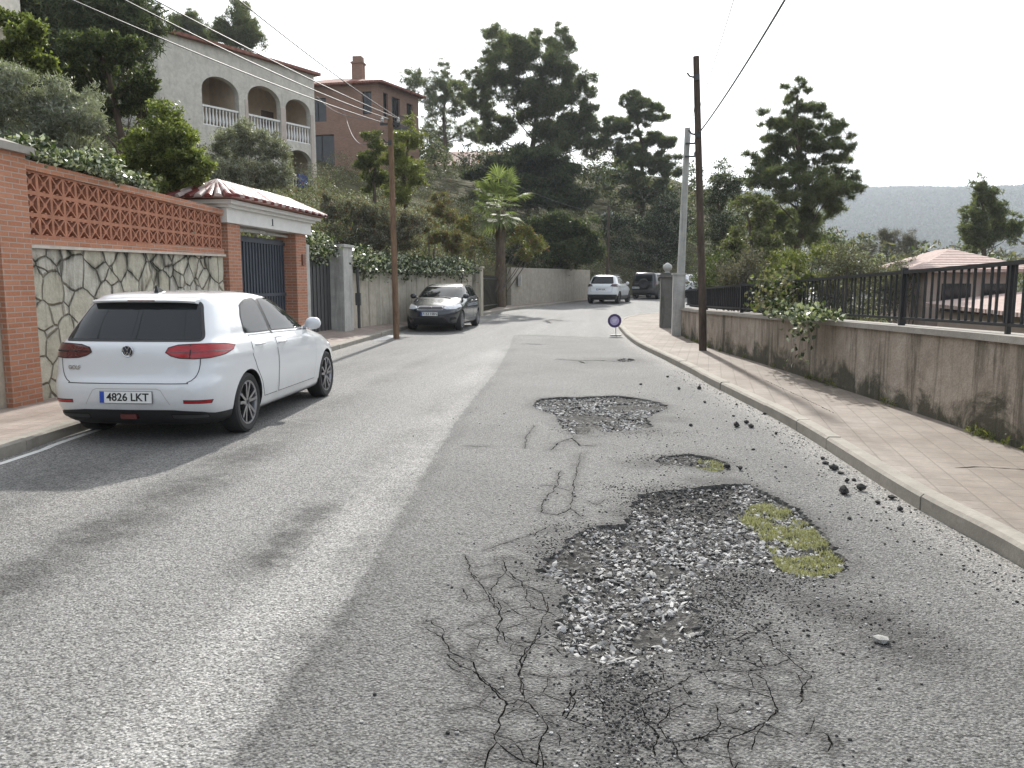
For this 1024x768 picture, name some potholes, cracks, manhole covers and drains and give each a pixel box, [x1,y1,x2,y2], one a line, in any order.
crack [425,557,605,768]
crack [625,620,822,768]
pothole [534,483,849,668]
pothole [532,396,668,434]
crack [492,431,604,548]
pothole [654,454,727,472]
